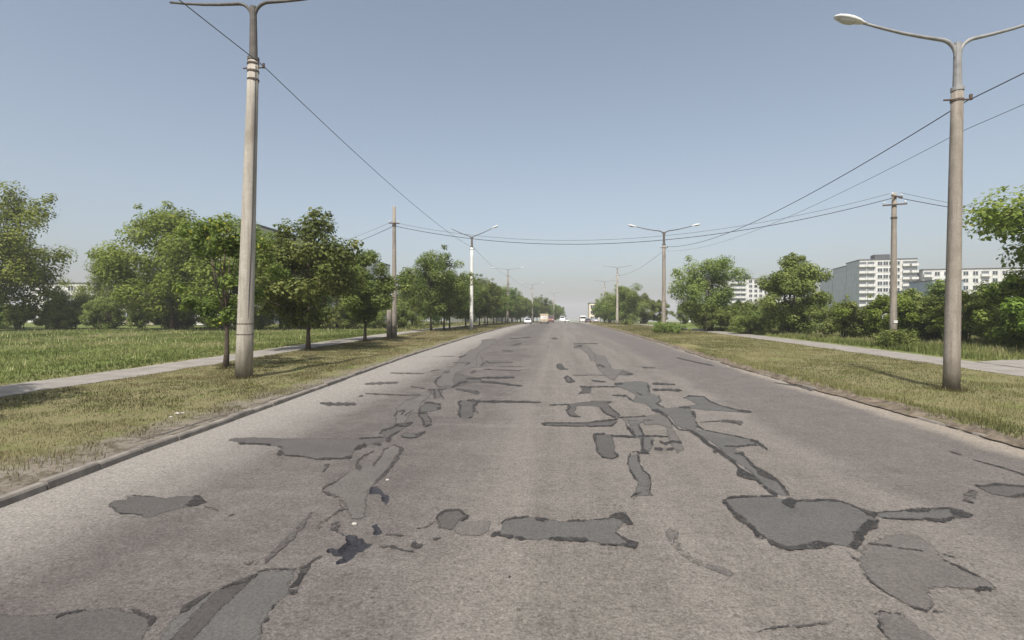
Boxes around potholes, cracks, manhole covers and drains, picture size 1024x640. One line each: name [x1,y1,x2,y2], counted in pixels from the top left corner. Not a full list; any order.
pothole [326,534,373,565]
crack [320,337,530,406]
crack [319,447,389,535]
pothole [369,486,390,505]
